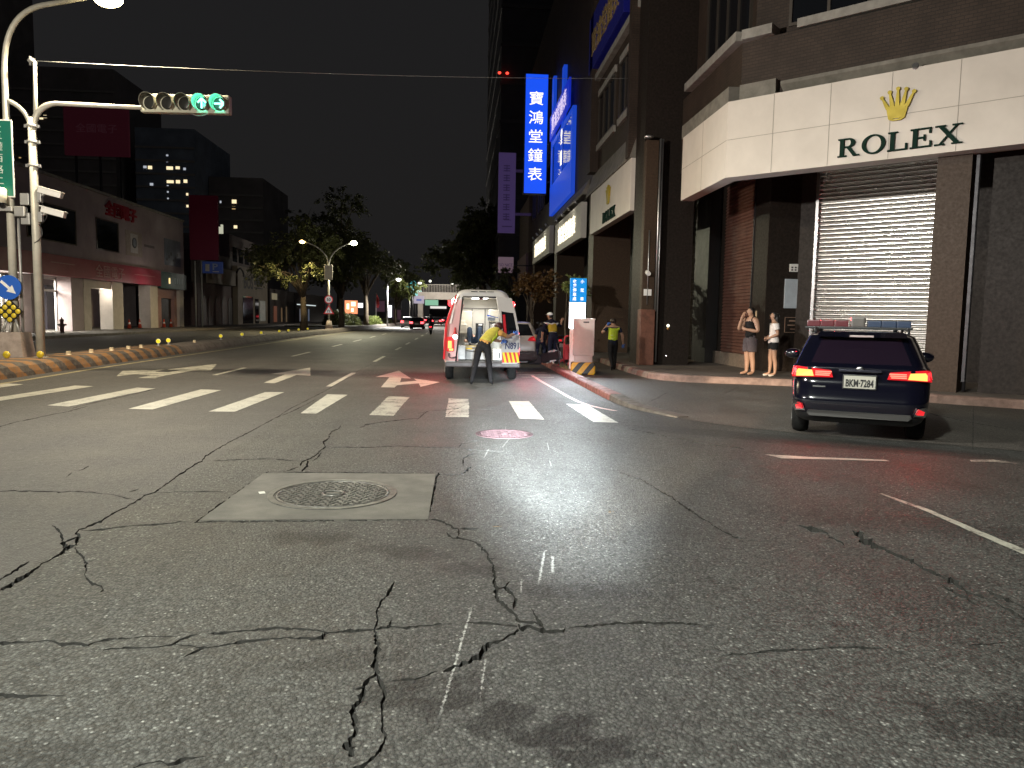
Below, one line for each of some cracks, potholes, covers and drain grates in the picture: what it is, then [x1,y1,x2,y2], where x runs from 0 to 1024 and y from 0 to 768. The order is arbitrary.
crack [799,525,1024,620]
manhole cover [475,429,533,439]
crack [0,519,713,768]
crack [620,472,761,541]
manhole cover [267,479,397,510]
crack [725,642,1005,656]
crack [0,362,500,592]
